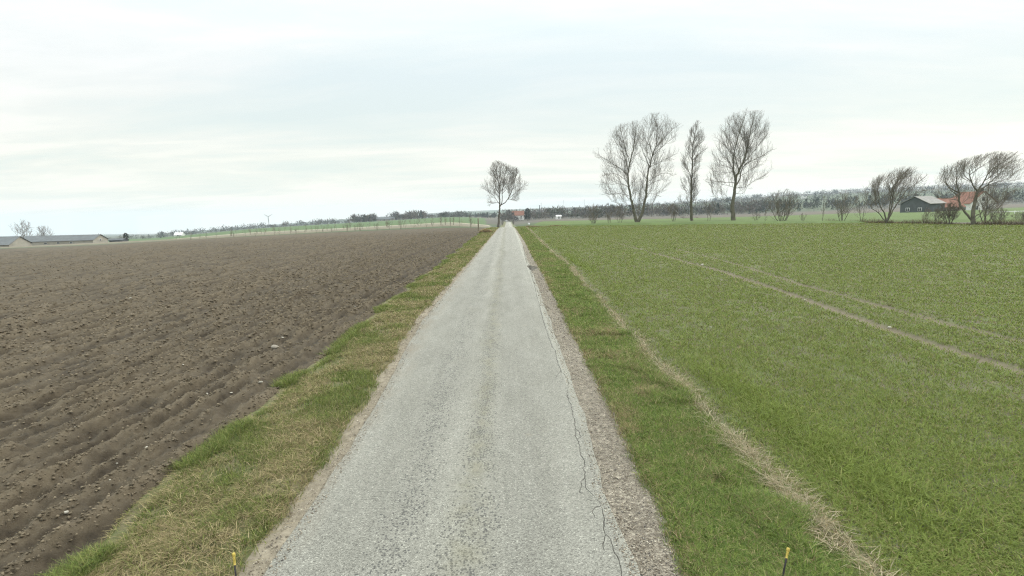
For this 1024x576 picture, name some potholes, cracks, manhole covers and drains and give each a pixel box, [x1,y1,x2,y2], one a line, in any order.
crack [530,273,622,576]
